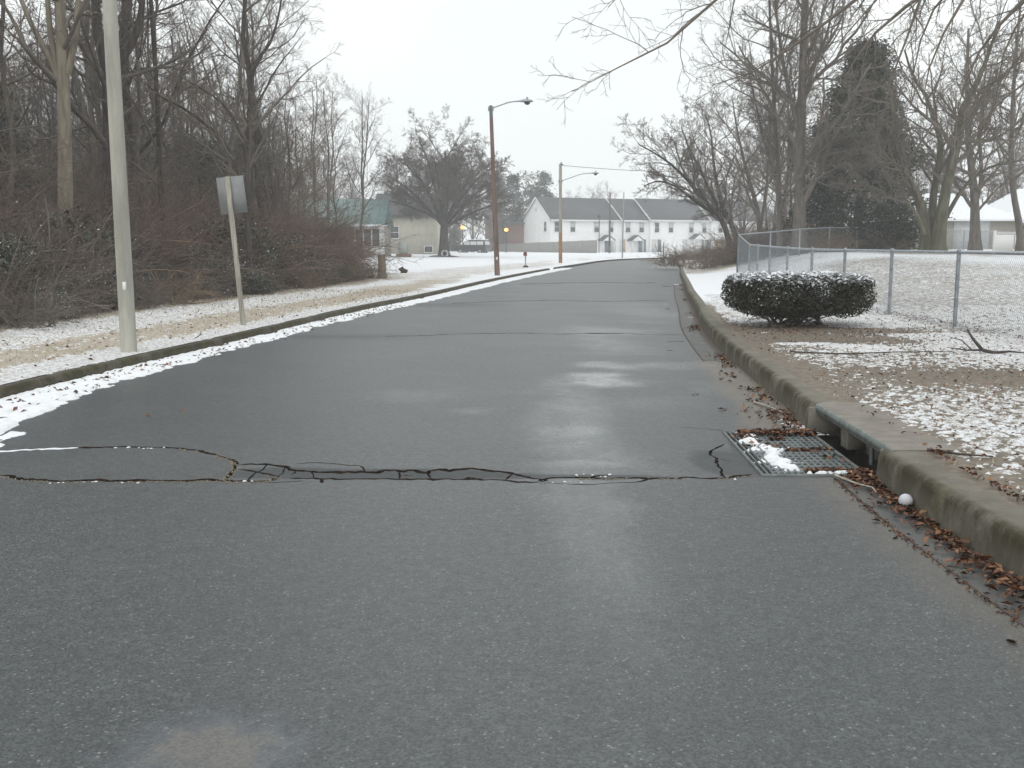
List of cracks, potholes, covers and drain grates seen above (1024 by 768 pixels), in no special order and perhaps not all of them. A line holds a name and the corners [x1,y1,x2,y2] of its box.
crack [0,427,755,485]
drain grate [722,402,962,477]
